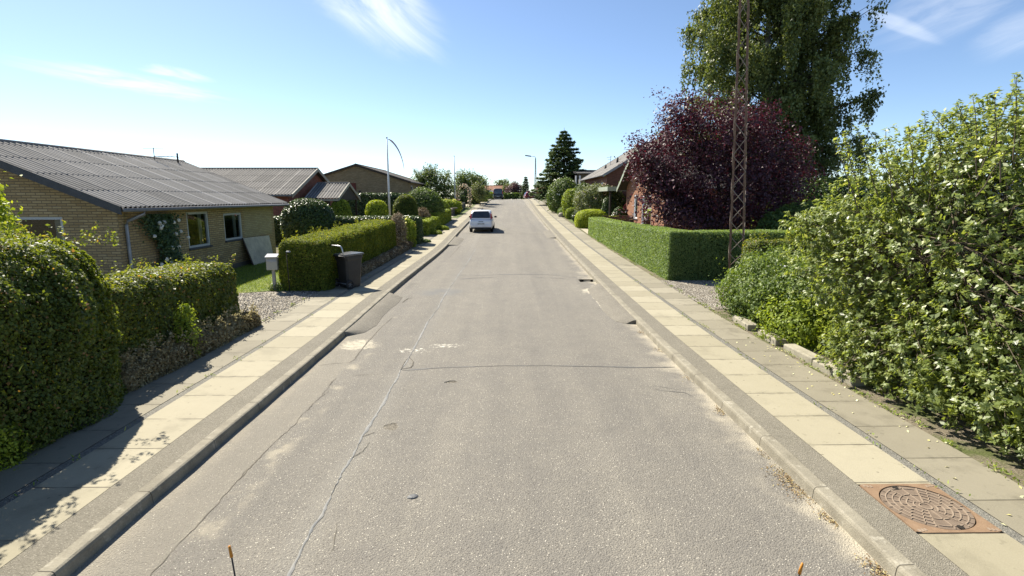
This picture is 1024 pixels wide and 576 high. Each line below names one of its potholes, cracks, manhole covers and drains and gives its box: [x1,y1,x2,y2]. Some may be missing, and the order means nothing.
manhole cover [860,484,1002,535]
crack [150,319,391,576]
